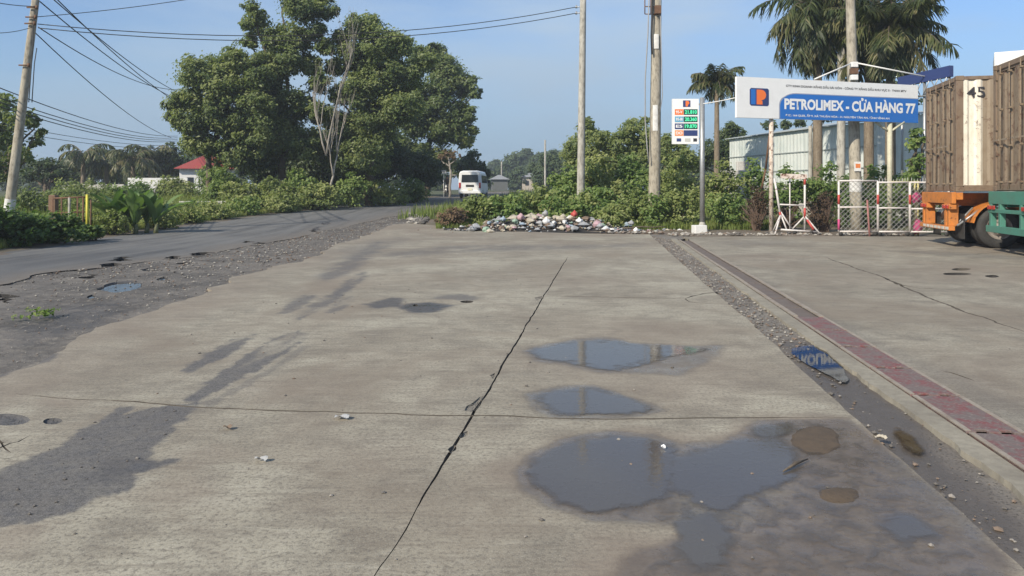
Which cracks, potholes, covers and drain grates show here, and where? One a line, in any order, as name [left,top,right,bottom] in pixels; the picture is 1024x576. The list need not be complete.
pothole [0,414,30,426]
crack [21,259,852,576]
pothole [97,281,142,293]
crack [826,257,1022,331]
